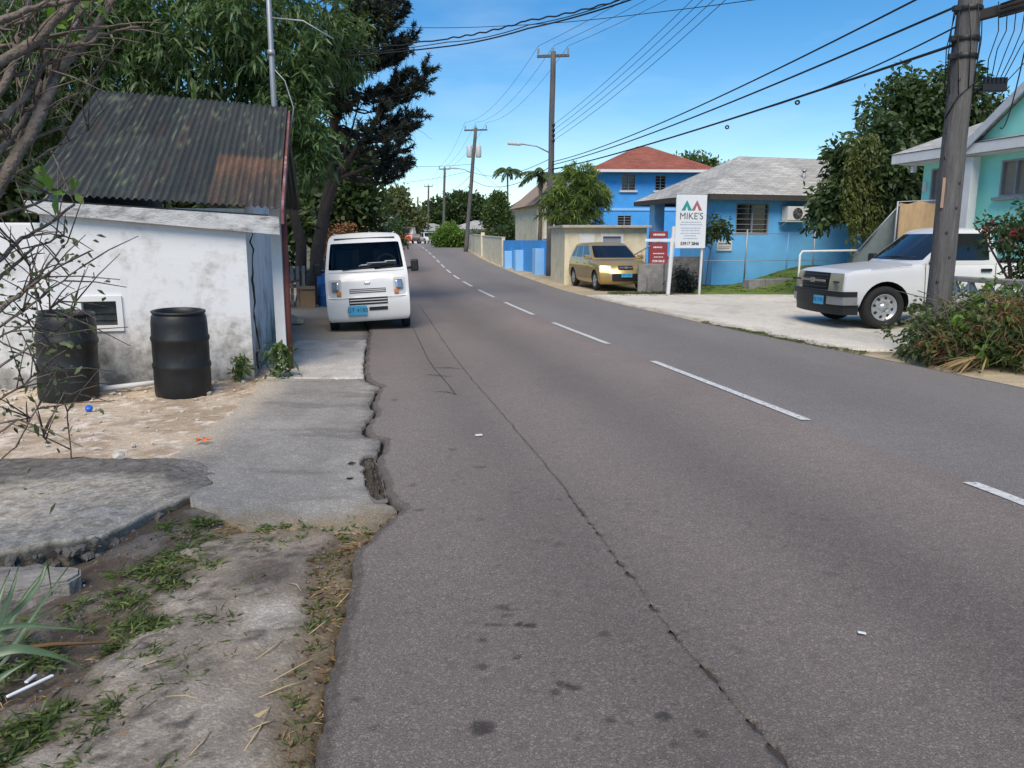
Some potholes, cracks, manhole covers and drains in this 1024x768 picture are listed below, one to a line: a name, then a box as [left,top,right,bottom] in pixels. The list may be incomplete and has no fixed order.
crack [362,341,400,515]
pothole [359,455,388,504]
